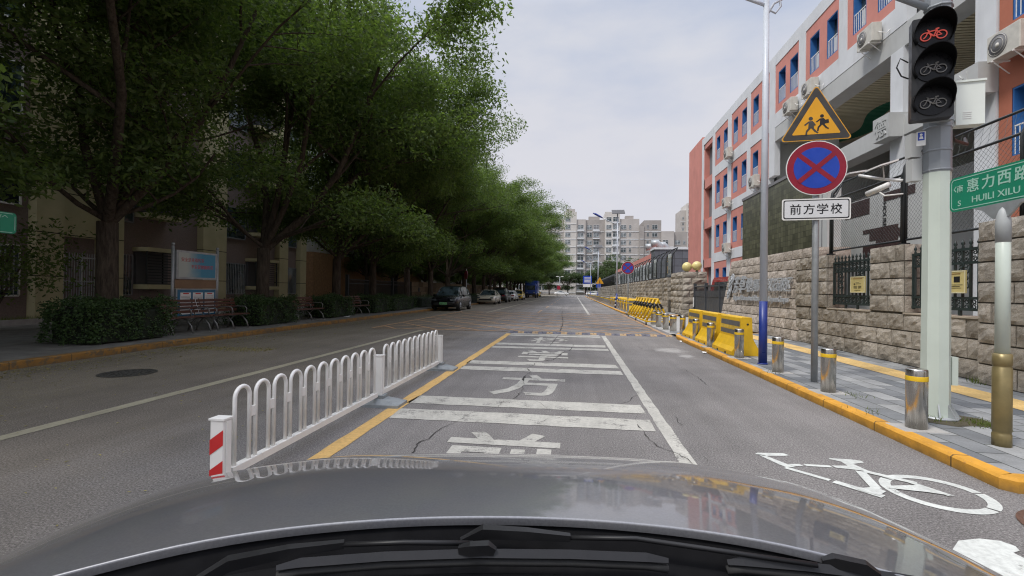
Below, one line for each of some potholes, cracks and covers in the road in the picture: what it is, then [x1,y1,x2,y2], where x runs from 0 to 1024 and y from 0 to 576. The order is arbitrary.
manhole cover [96,369,158,377]
